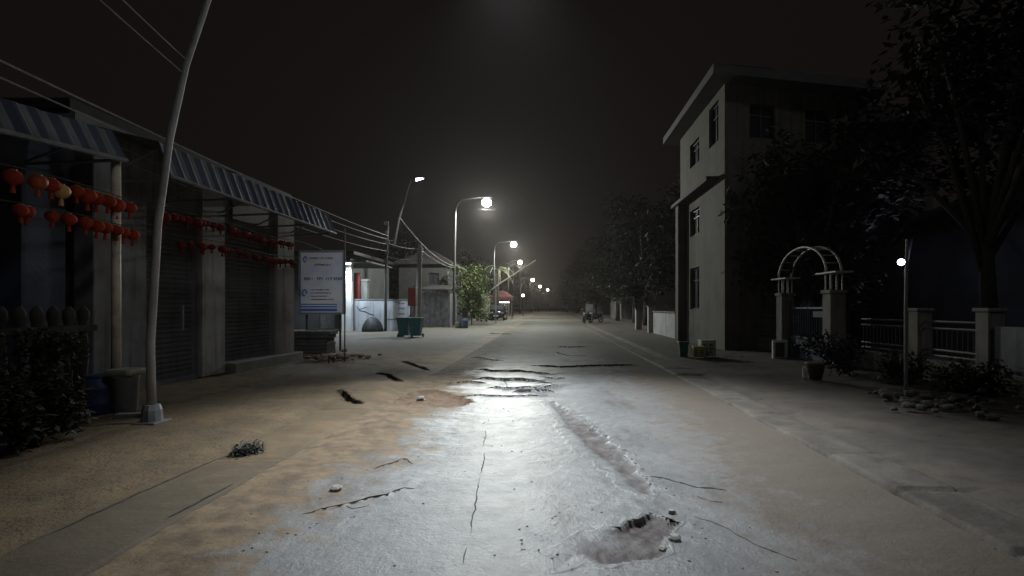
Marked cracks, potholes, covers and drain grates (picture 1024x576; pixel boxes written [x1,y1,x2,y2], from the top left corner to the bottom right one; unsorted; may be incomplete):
crack [447,346,636,397]
crack [303,487,414,514]
pothole [539,398,660,498]
crack [463,430,486,563]
crack [645,476,795,560]
pothole [538,510,686,575]
